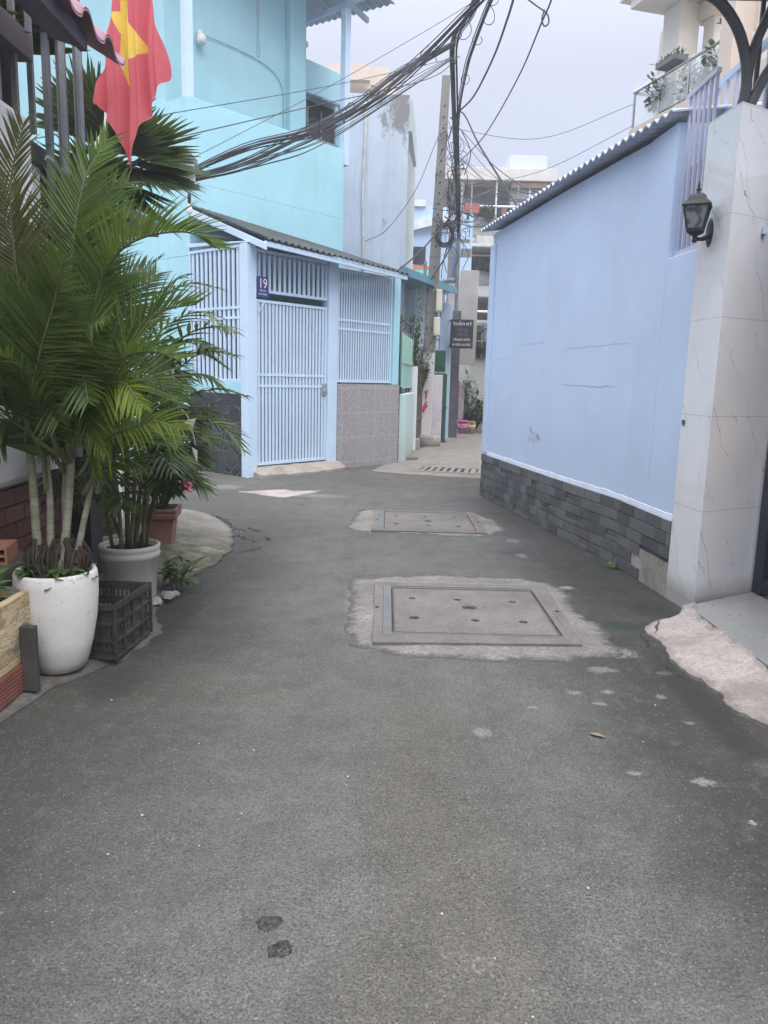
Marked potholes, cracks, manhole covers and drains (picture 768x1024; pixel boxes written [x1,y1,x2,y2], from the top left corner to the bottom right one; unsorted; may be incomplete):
manhole cover [371,510,488,535]
pothole [256,916,284,932]
crack [212,515,271,554]
pothole [267,940,293,958]
drain grate [413,465,482,475]
manhole cover [372,582,582,647]
